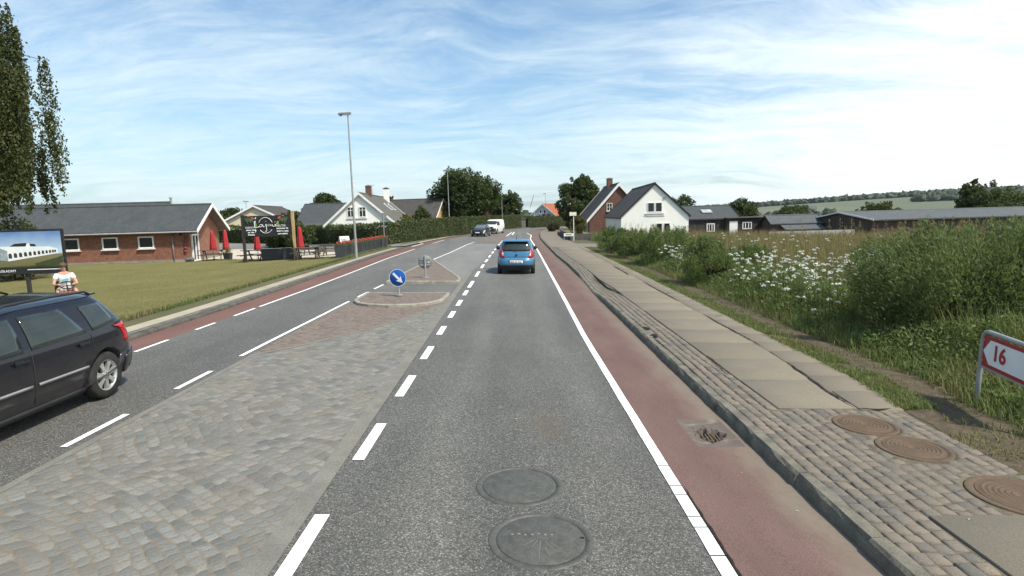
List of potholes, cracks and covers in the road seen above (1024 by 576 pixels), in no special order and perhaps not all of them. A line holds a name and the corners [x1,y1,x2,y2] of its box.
manhole cover [963,475,1024,515]
manhole cover [832,414,900,436]
manhole cover [488,513,594,571]
manhole cover [476,467,563,507]
manhole cover [874,435,956,463]
